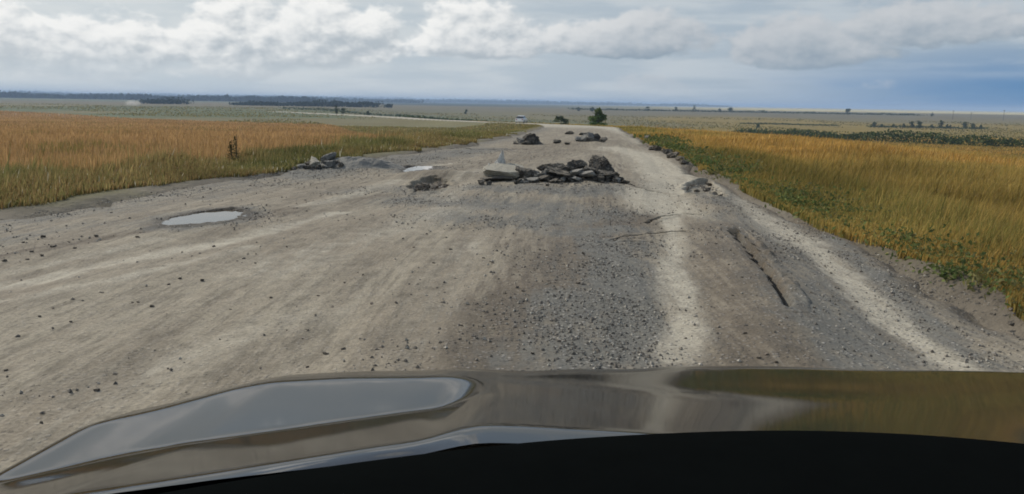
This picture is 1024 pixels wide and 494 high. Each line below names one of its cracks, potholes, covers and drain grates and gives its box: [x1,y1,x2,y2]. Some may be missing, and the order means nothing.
crack [591,212,812,314]
pothole [672,177,741,199]
pothole [151,206,253,228]
pothole [400,174,459,195]
pothole [395,165,437,173]
